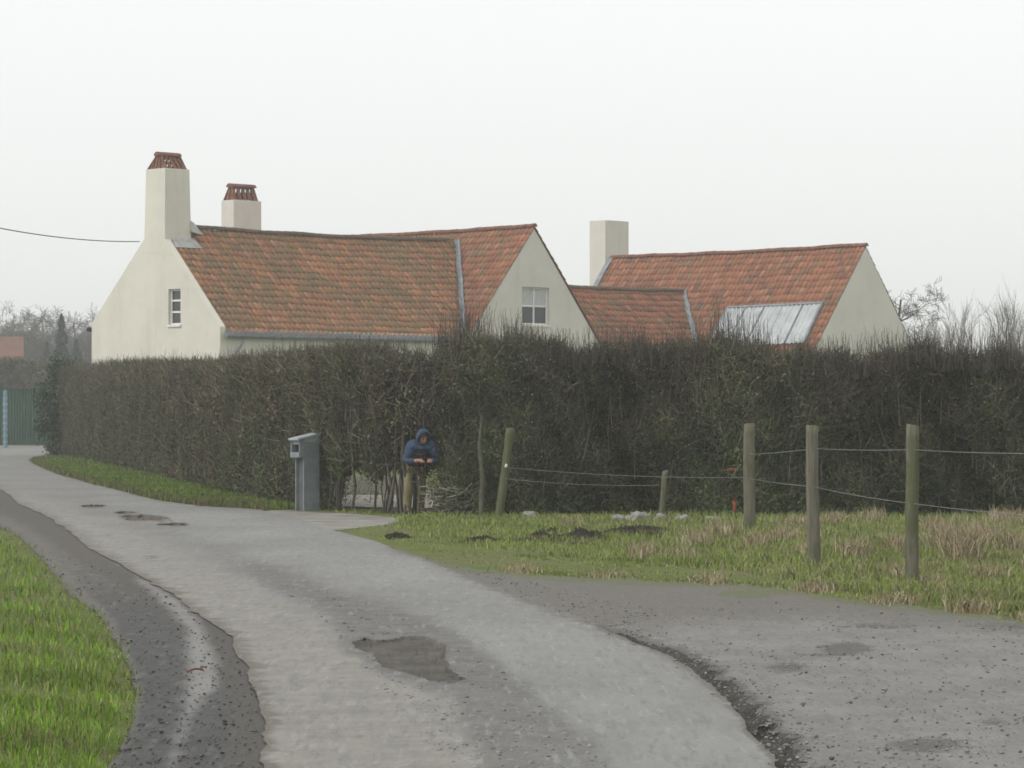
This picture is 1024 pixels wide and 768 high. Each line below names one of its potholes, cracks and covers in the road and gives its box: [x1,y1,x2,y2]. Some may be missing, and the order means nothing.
pothole [352,636,466,684]
